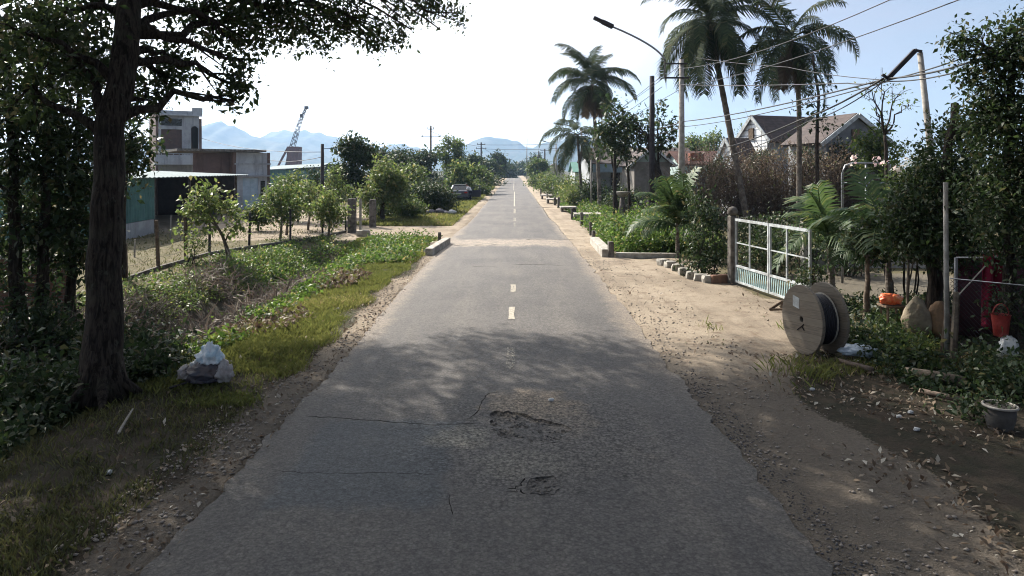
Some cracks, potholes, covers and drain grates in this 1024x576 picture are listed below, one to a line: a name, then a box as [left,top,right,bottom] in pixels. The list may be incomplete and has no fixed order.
pothole [490,410,572,447]
crack [309,392,496,425]
pothole [525,475,560,495]
